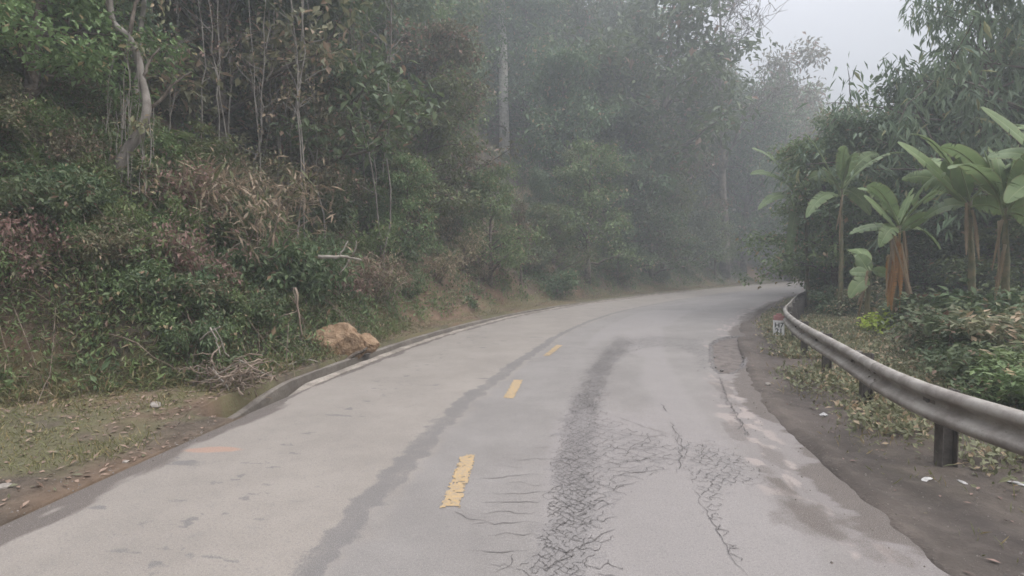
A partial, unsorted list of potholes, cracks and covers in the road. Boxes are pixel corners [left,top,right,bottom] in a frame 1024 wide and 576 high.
crack [457,335,765,576]
